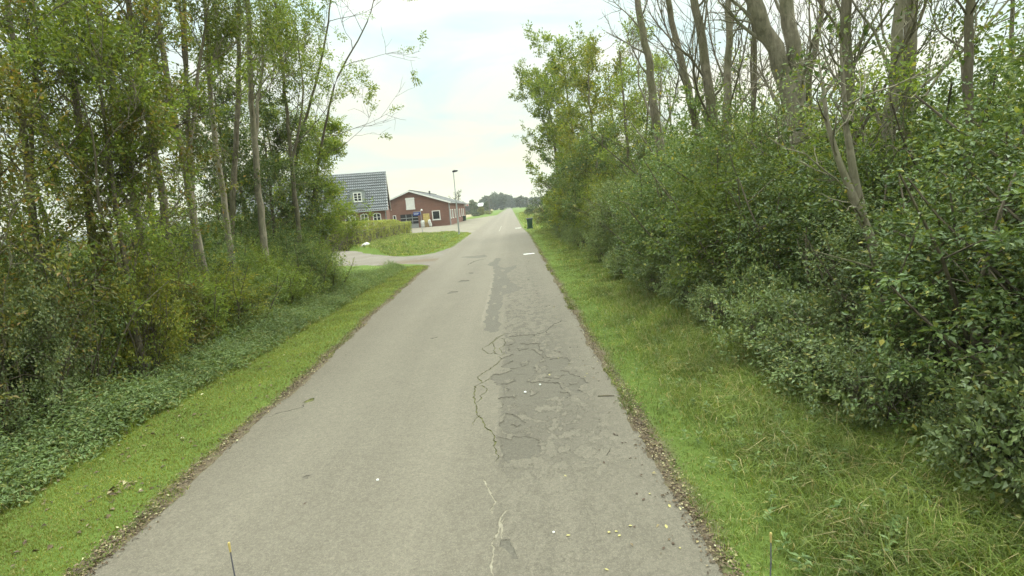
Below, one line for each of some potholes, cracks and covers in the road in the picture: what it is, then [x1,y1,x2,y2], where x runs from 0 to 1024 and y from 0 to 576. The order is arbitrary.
crack [483,478,507,576]
crack [472,333,509,460]
